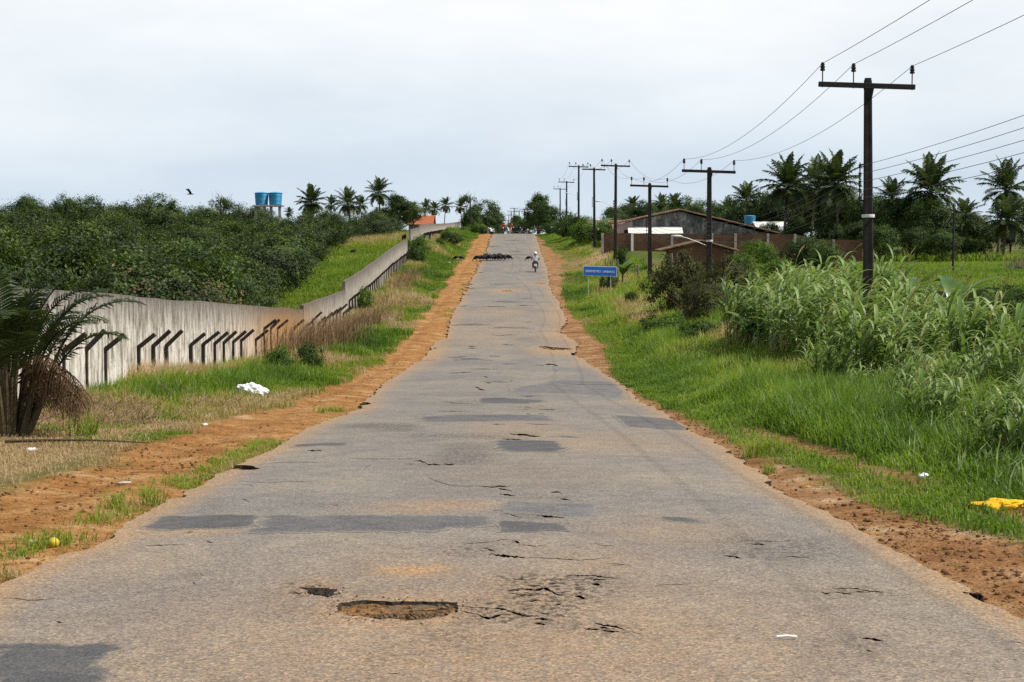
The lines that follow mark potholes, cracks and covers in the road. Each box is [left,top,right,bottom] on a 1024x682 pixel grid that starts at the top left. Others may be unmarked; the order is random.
pothole [299,585,345,598]
pothole [309,595,489,625]
crack [465,539,629,625]
